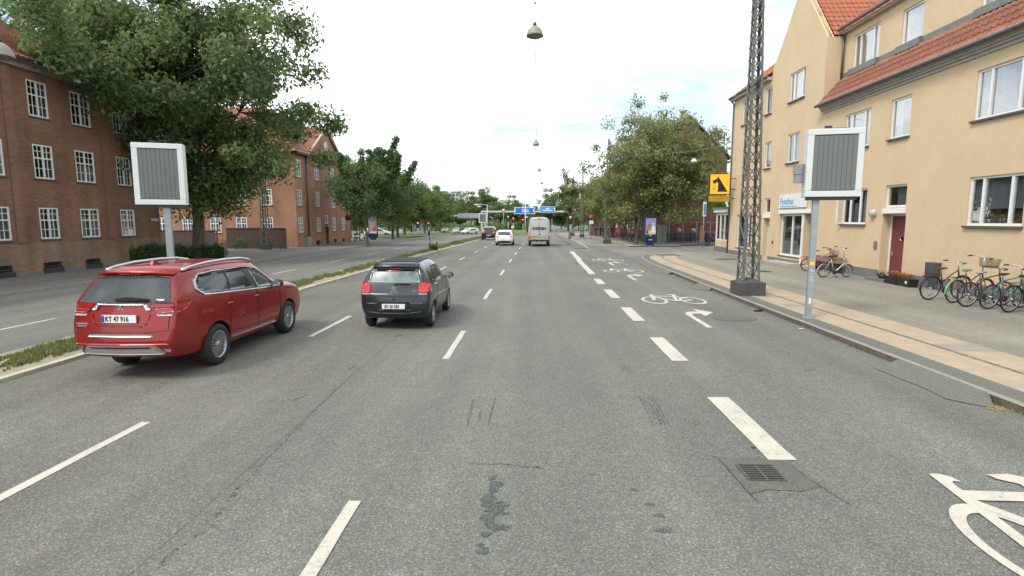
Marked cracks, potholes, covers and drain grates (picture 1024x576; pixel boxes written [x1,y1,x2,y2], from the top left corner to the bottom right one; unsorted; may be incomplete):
drain grate [735,464,788,481]
